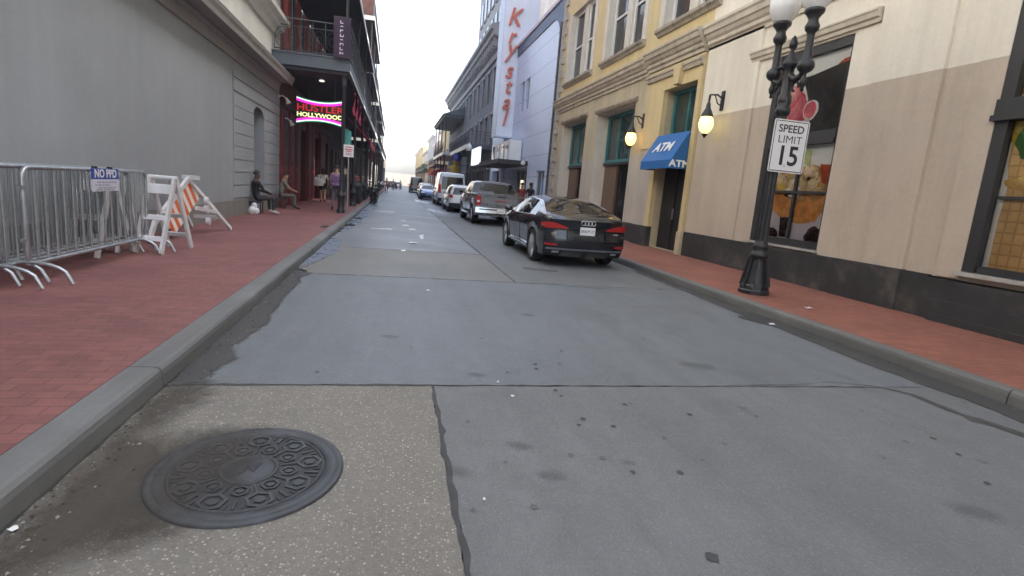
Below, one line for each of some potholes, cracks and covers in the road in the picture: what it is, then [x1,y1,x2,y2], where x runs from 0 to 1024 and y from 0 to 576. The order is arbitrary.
manhole cover [140,428,343,529]
